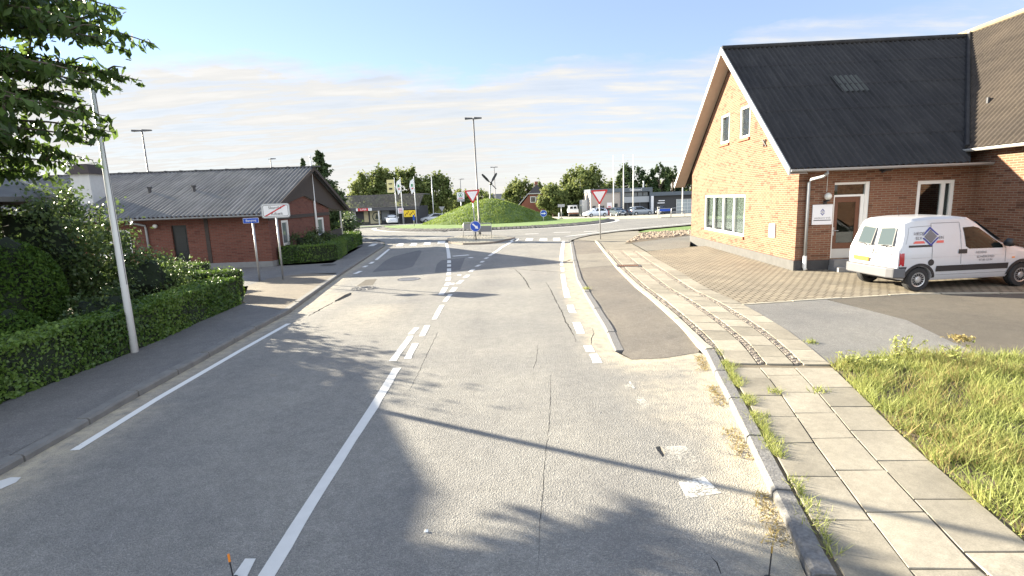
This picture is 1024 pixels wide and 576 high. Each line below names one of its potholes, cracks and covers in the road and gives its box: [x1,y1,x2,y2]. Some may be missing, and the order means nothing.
crack [487,259,594,344]
crack [533,345,551,570]
